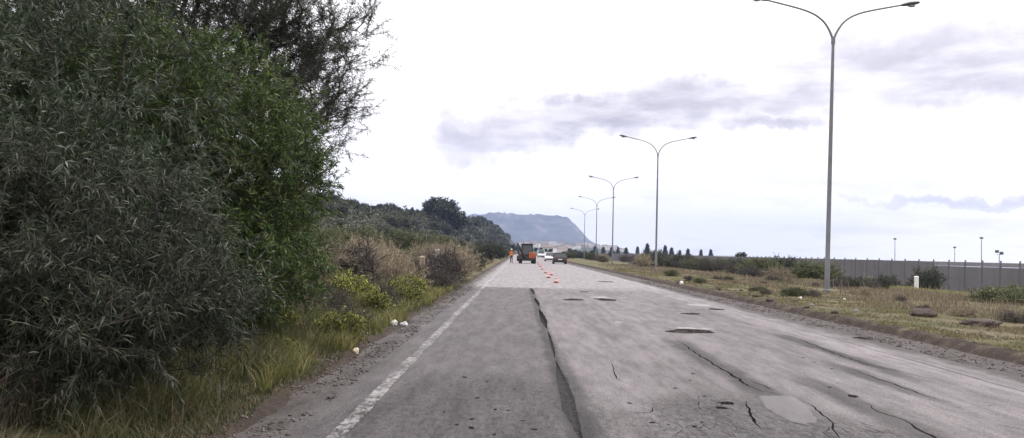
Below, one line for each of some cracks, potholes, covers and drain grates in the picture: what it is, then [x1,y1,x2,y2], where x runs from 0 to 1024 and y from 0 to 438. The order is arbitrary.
crack [675,340,937,438]
